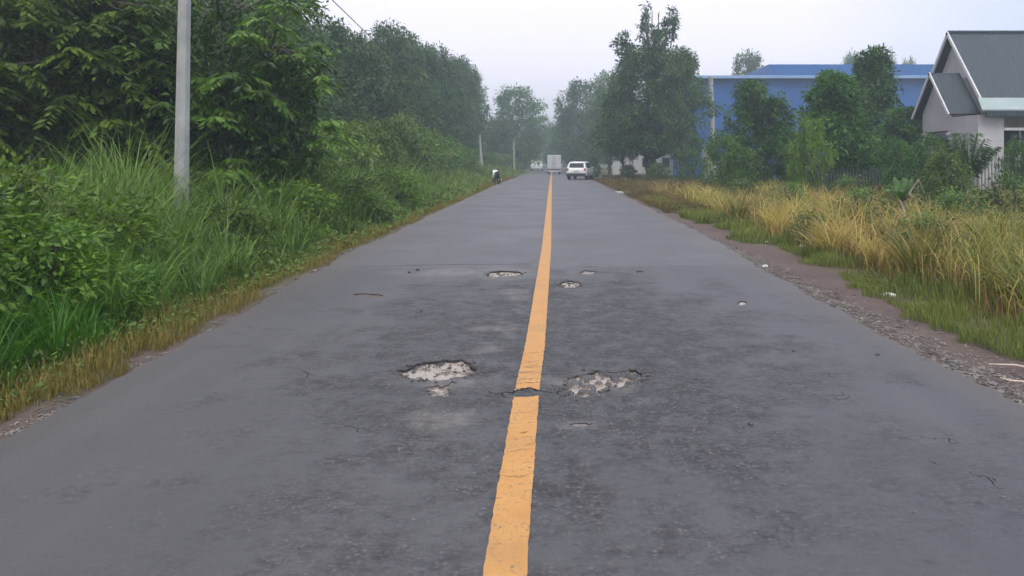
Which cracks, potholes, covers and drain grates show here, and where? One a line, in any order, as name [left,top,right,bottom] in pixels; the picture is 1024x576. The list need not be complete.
pothole [554,279,584,288]
crack [489,384,569,398]
pothole [555,367,653,401]
pothole [393,356,481,383]
pothole [425,381,456,397]
crack [926,437,1002,489]
